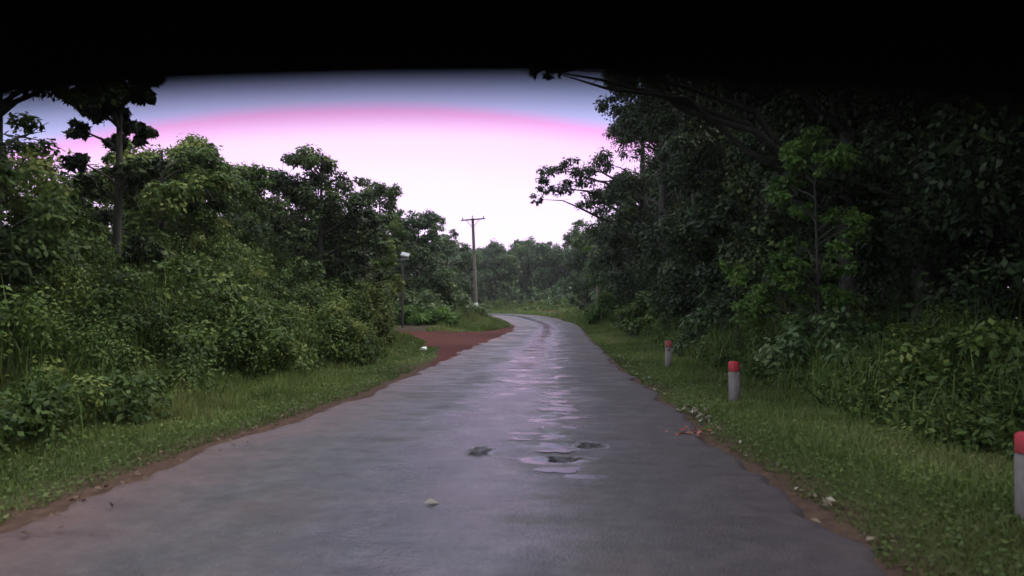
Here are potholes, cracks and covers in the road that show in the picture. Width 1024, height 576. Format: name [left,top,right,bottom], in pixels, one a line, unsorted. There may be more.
pothole [461,445,499,459]
pothole [571,441,613,450]
pothole [541,456,601,465]
